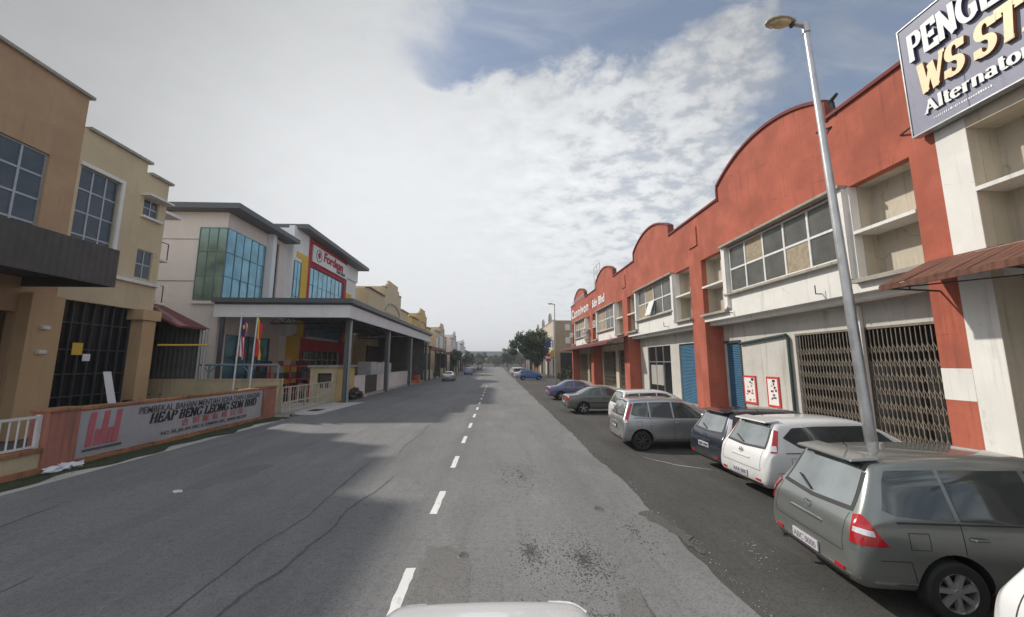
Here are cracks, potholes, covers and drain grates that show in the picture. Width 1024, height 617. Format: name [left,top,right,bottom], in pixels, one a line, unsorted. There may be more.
crack [165,461,395,617]
